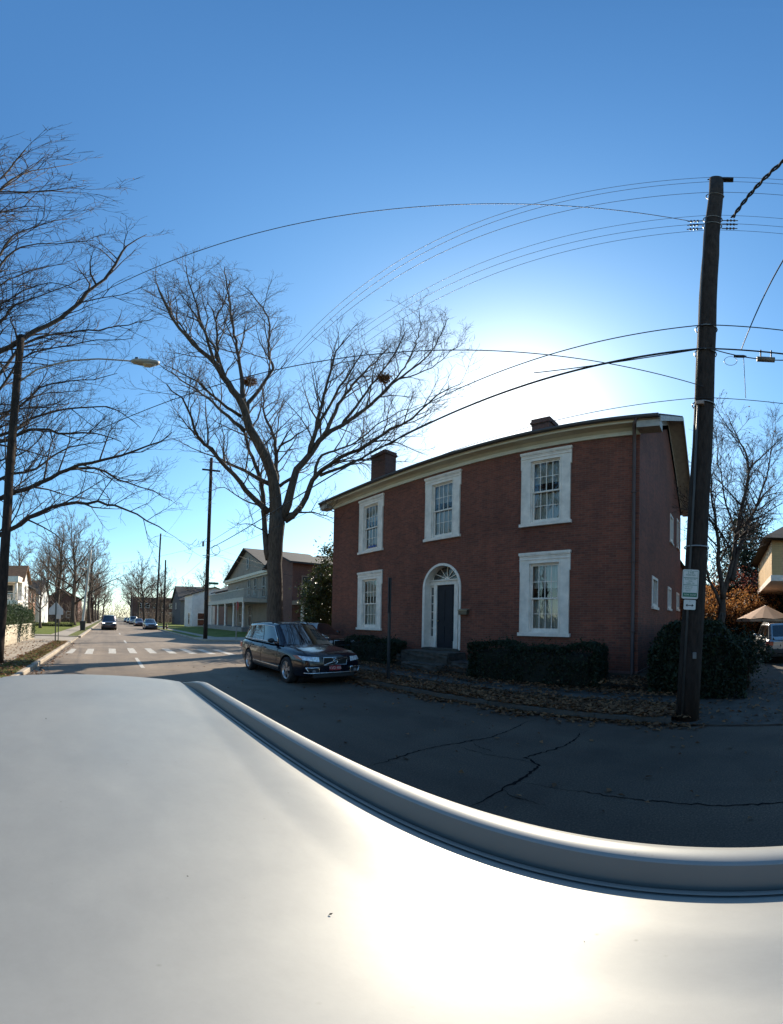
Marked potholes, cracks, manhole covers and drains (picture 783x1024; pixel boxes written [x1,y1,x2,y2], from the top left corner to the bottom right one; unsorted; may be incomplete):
crack [370,722,781,807]
